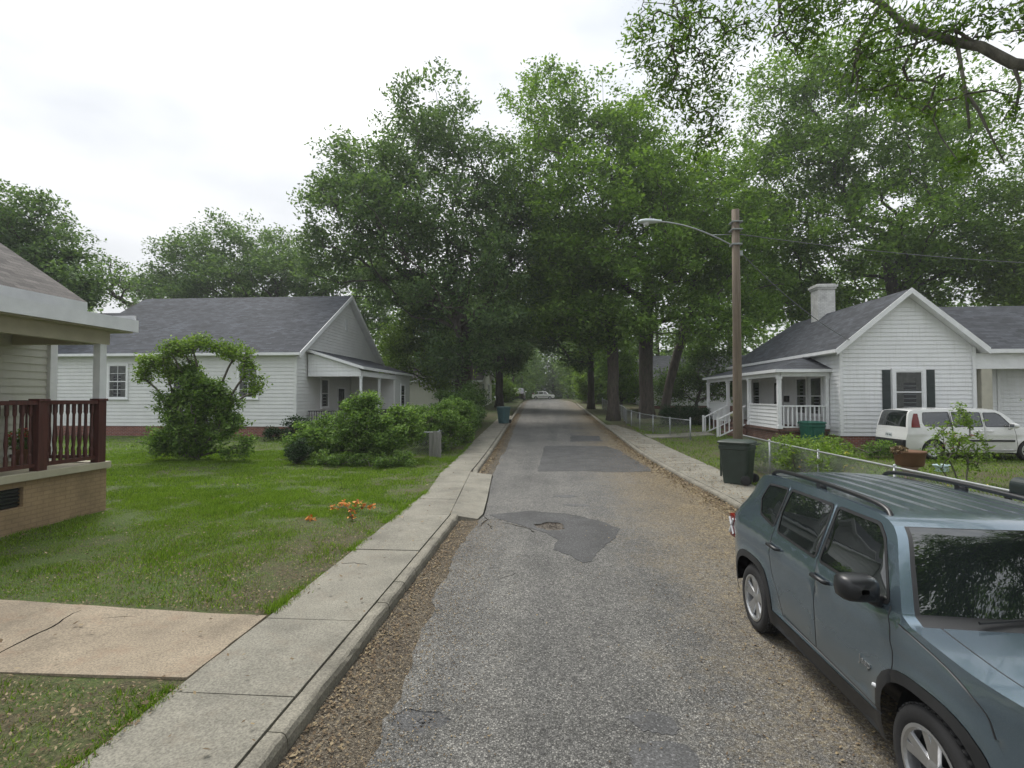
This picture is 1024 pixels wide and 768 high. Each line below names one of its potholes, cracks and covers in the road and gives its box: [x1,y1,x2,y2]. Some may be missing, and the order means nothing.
crack [0,610,81,653]
pothole [534,522,565,530]
